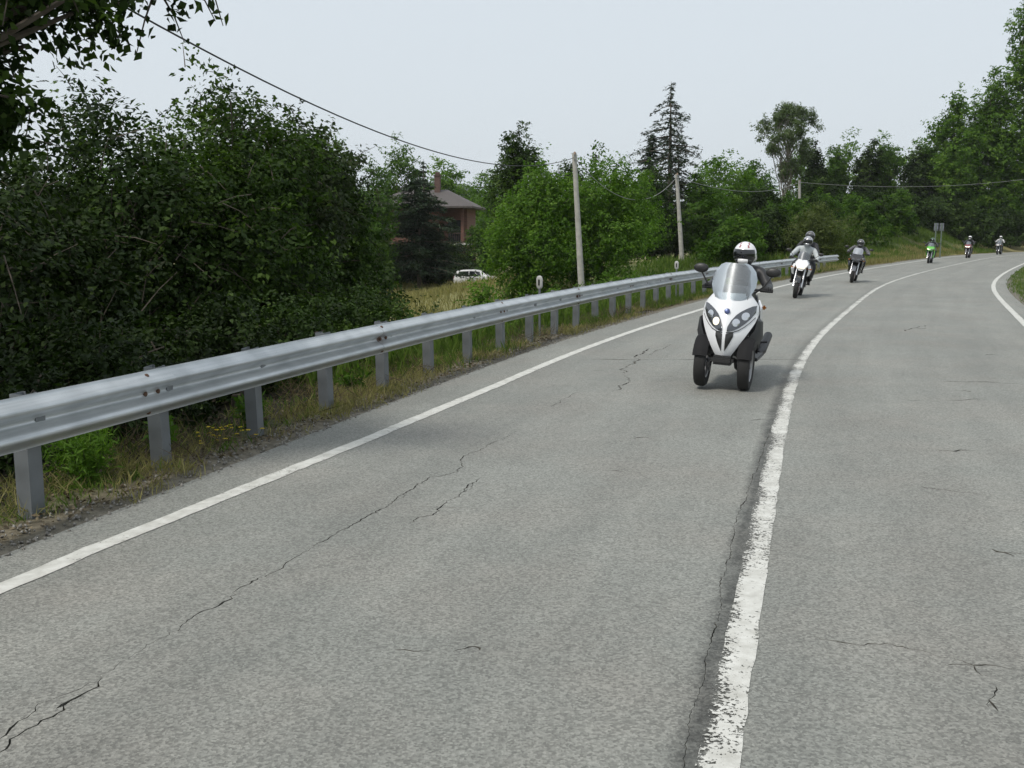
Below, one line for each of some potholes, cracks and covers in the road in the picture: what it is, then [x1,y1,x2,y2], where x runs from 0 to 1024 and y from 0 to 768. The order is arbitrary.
crack [0,432,515,752]
crack [591,347,786,390]
crack [814,636,1010,711]
